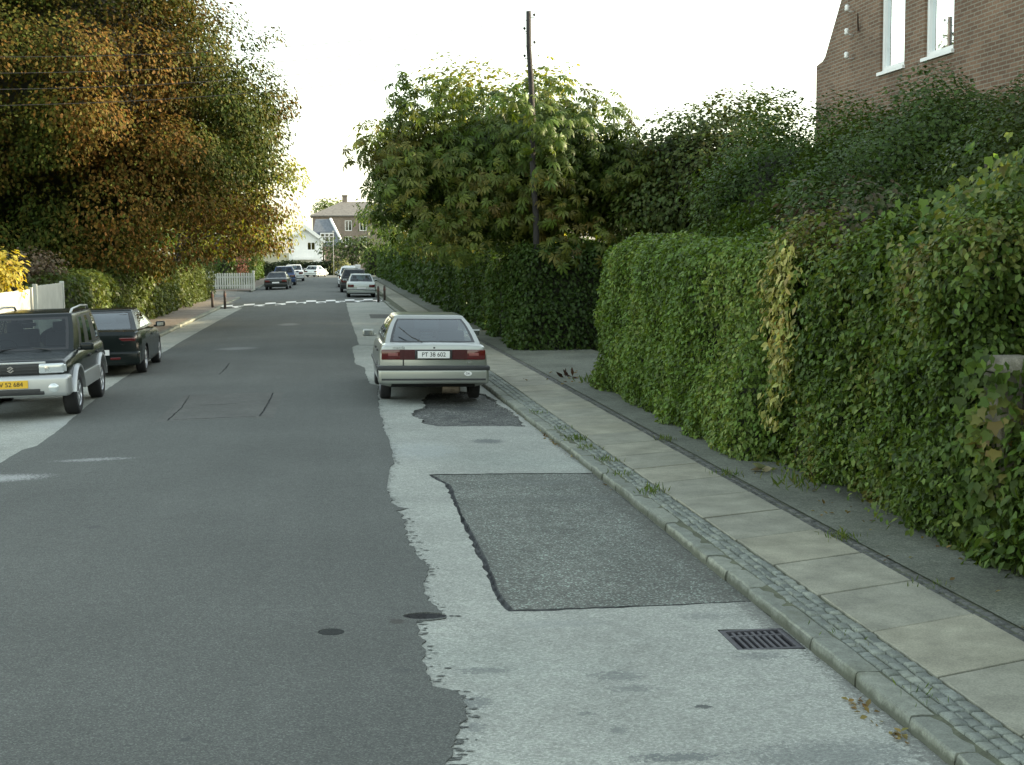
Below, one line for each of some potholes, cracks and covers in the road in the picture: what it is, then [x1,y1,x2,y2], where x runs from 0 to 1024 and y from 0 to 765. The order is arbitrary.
drain grate [719,628,804,650]
